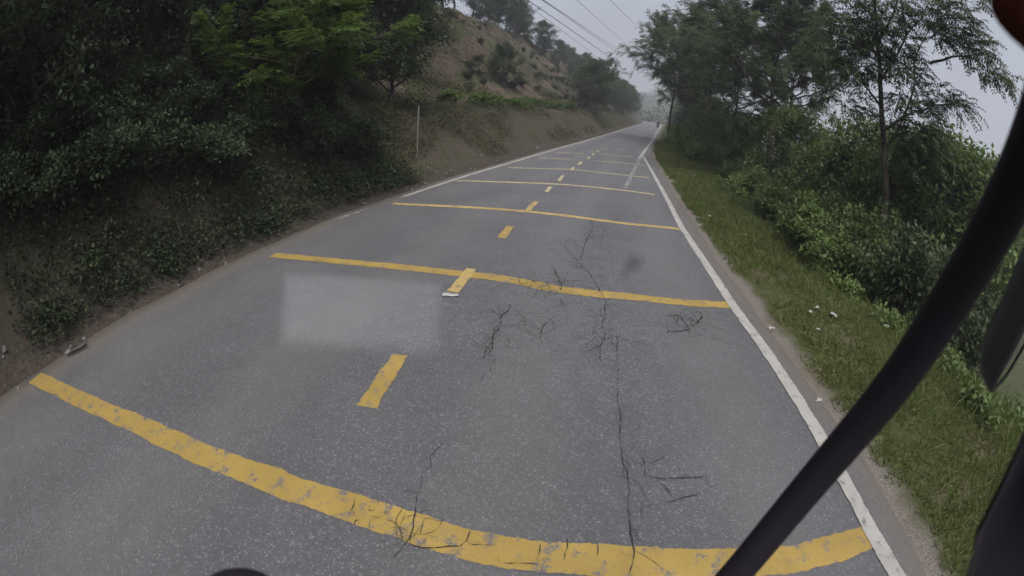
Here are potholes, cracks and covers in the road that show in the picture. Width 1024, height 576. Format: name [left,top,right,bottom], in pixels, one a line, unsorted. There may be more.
crack [472,219,726,571]
crack [336,473,488,558]
